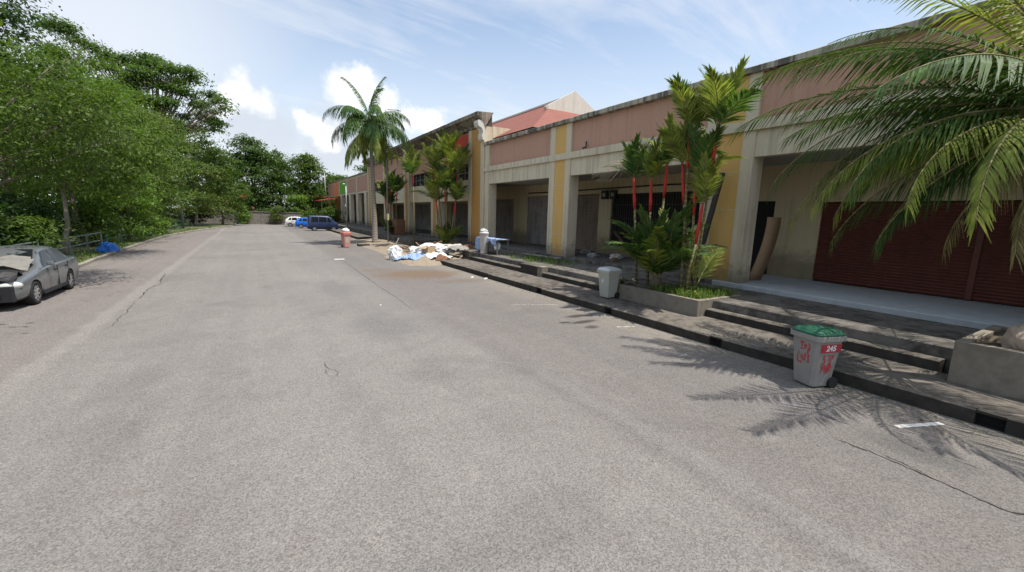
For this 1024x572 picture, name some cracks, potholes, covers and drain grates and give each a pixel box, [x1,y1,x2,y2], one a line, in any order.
crack [834,438,1024,515]
